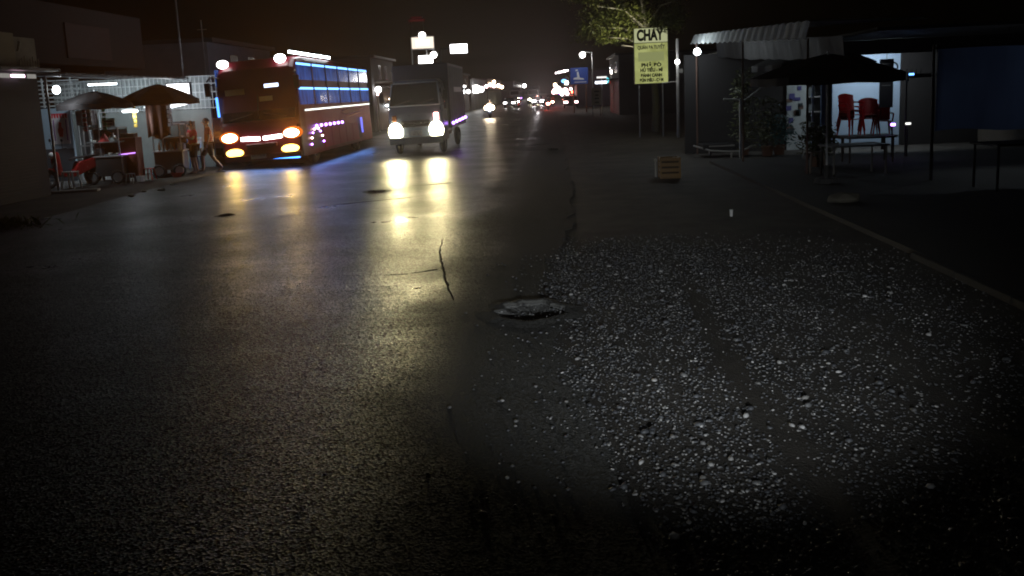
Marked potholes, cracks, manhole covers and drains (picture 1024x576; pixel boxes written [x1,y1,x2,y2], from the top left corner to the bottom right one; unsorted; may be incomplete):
crack [393,240,454,300]
pothole [474,298,589,328]
